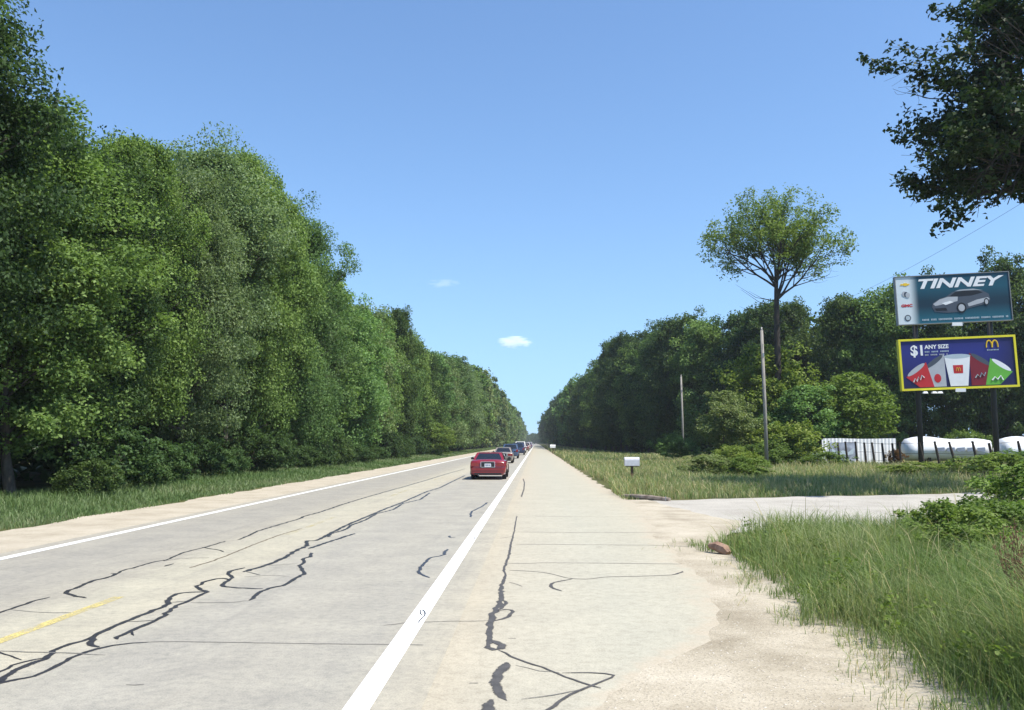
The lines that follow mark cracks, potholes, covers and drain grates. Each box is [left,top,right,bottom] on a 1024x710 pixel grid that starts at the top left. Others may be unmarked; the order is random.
crack [510,563,683,591]
crack [190,528,302,568]
